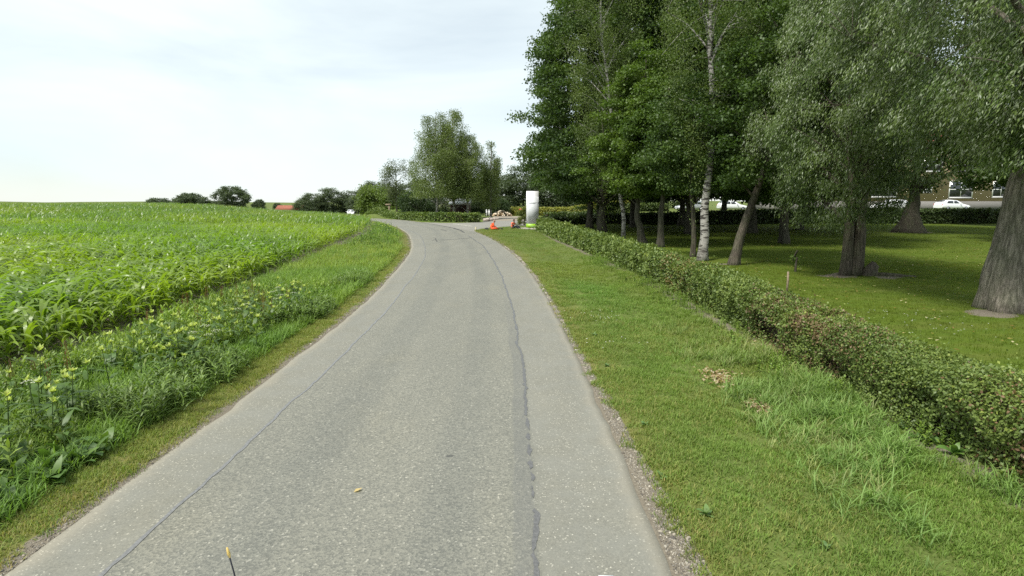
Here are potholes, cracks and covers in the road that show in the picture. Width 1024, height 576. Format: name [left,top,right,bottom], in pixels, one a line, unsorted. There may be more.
crack [428,223,540,576]
